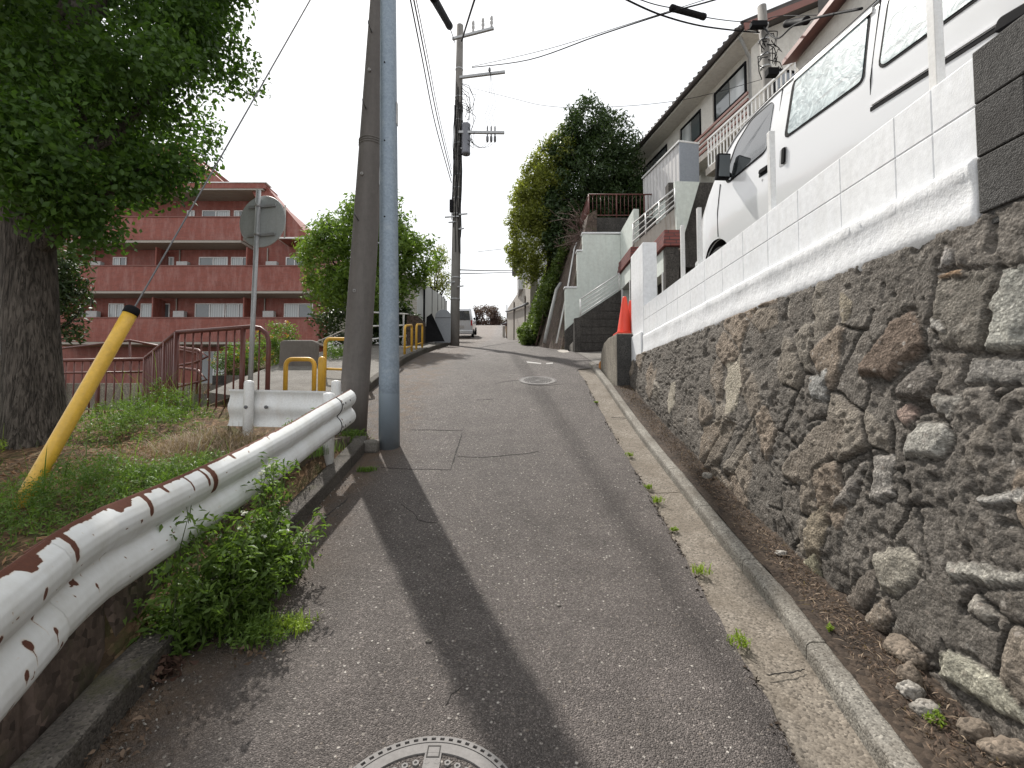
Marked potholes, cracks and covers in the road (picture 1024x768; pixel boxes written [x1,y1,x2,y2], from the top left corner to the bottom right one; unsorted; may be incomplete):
manhole cover [519,376,557,385]
manhole cover [353,736,508,768]
